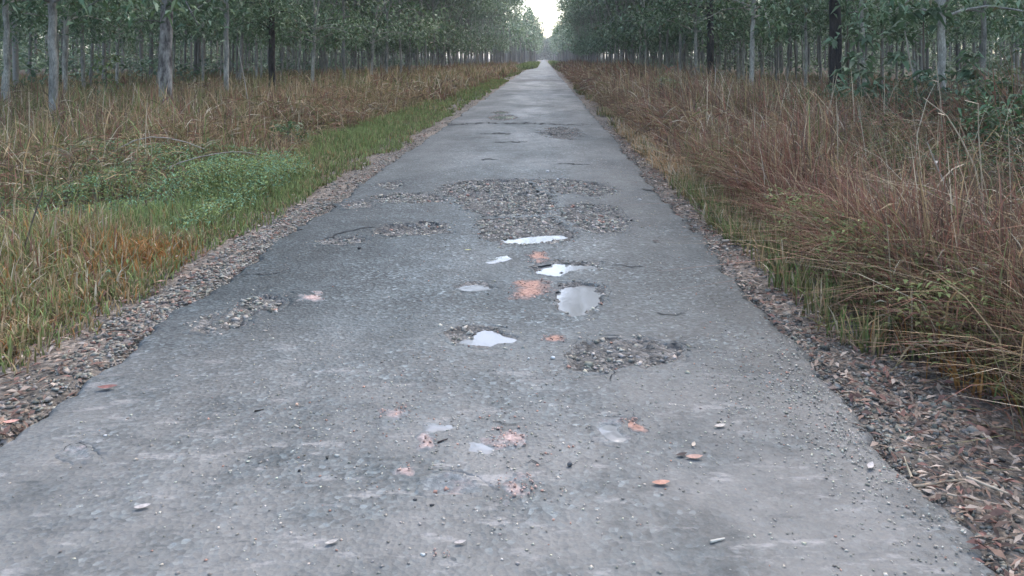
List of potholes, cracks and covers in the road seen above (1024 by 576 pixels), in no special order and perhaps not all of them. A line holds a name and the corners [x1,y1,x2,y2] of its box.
pothole [431,320,530,350]
pothole [447,279,498,294]
pothole [525,177,622,199]
pothole [428,178,564,220]
pothole [462,213,588,248]
